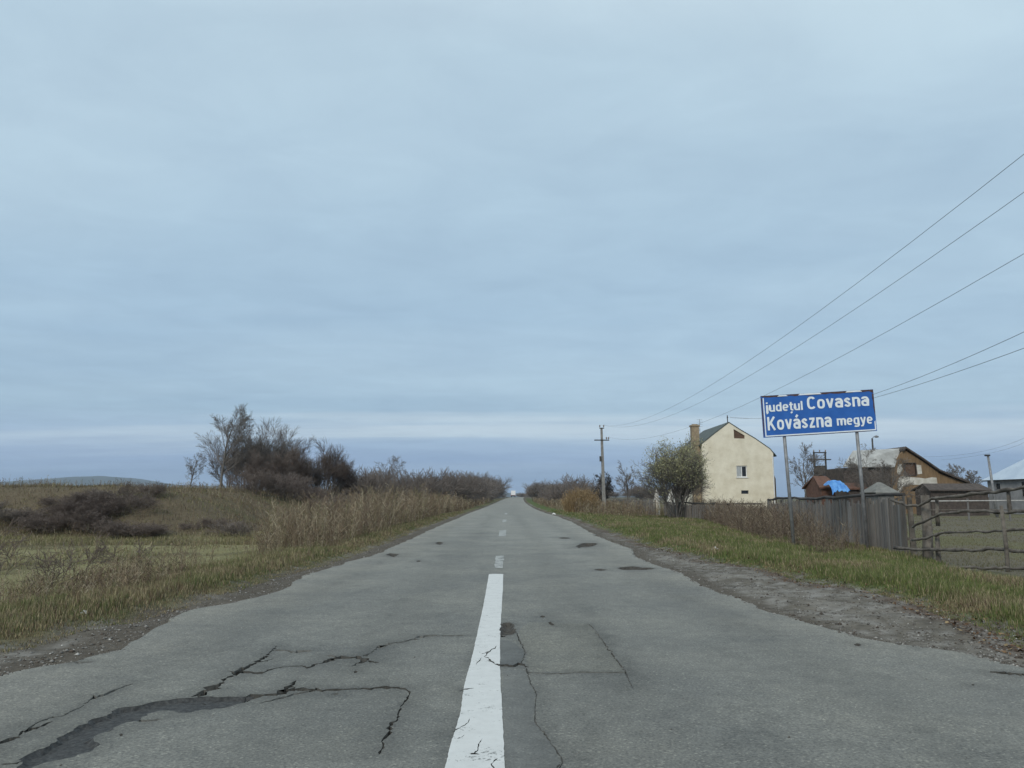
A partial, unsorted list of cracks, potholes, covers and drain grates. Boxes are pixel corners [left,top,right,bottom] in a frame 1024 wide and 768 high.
pothole [500,623,516,637]
crack [477,624,633,768]
crack [0,635,463,768]
